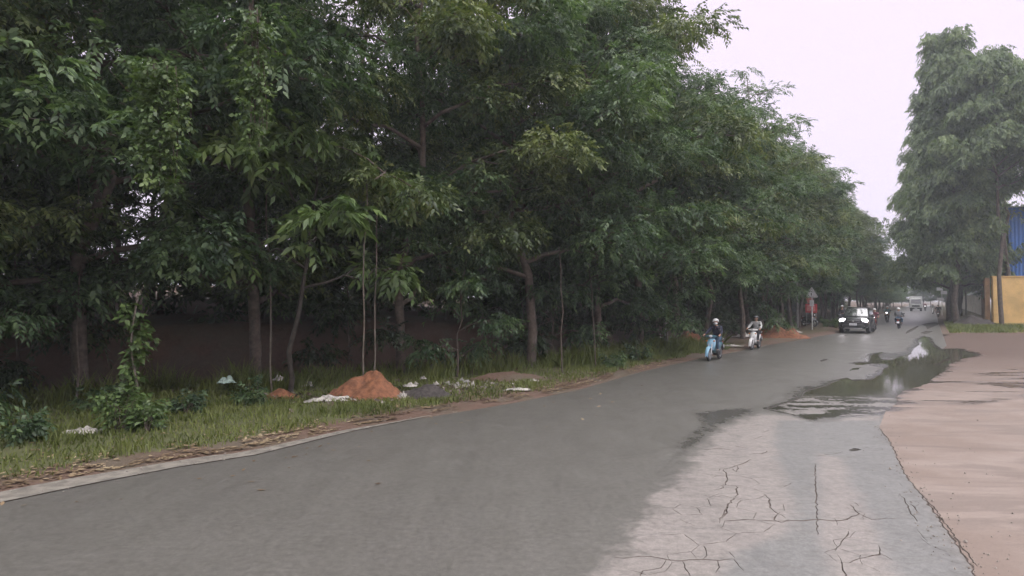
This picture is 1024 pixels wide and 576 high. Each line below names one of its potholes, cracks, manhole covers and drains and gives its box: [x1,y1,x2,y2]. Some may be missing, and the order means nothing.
crack [616,429,976,576]
